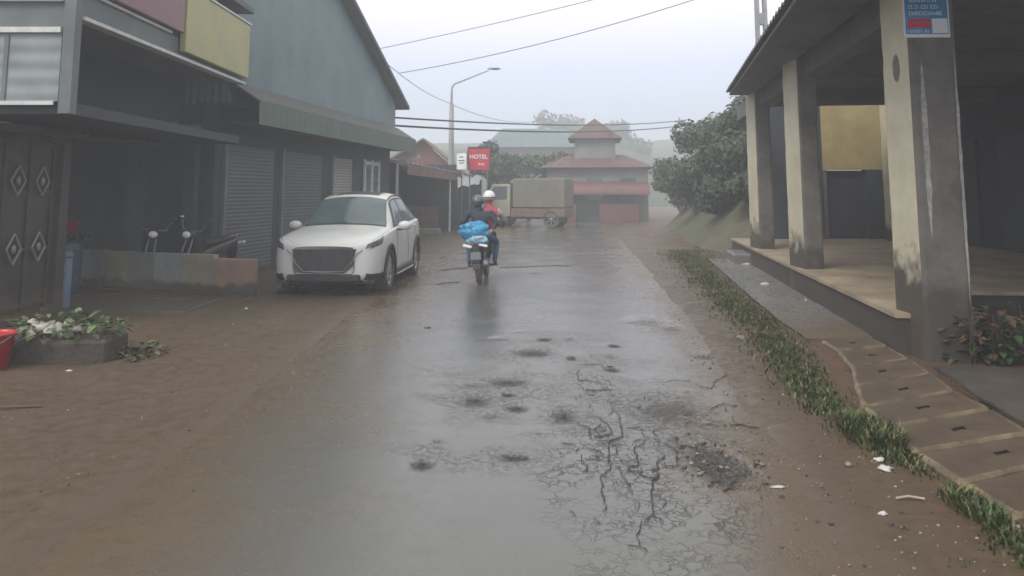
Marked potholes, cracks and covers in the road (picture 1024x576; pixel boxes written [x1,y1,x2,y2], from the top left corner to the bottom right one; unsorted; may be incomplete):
pothole [691,443,754,490]
crack [564,363,760,565]
